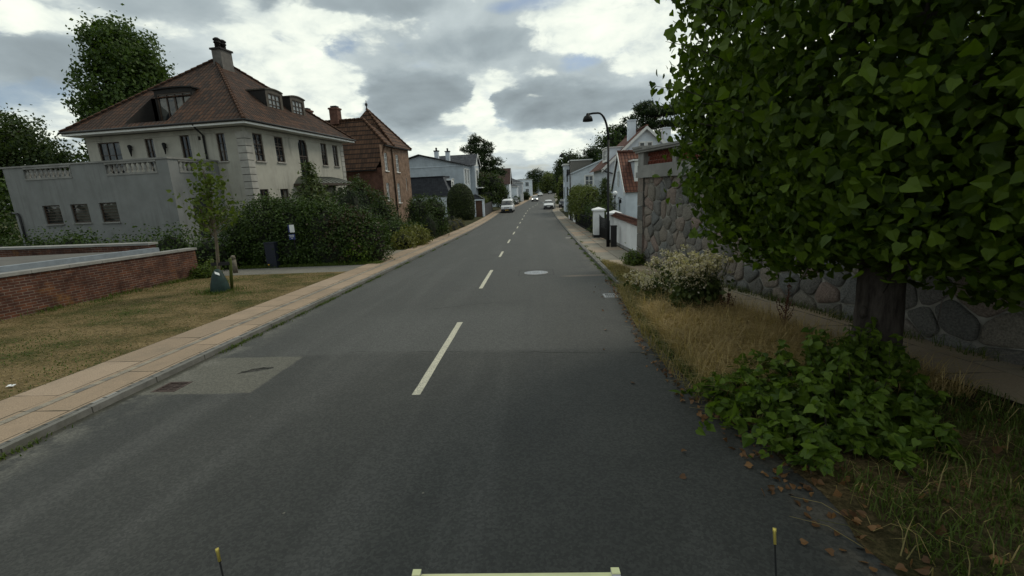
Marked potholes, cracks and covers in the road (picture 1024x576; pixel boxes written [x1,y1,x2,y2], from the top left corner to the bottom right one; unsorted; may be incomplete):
drain grate [151,381,193,392]
